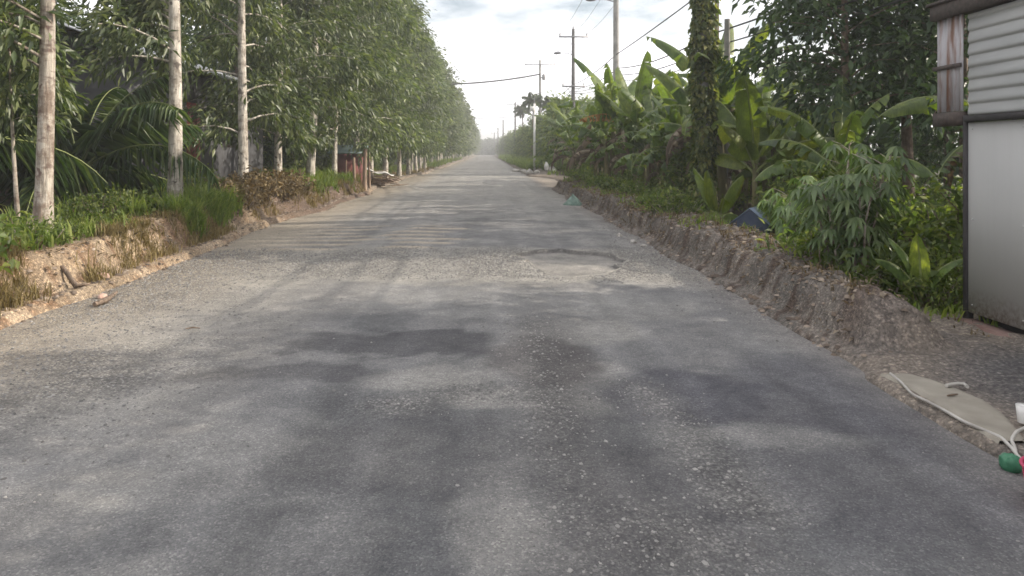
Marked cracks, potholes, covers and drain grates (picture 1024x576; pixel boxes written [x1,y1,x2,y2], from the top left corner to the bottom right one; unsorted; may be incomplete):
pothole [514,248,629,278]
